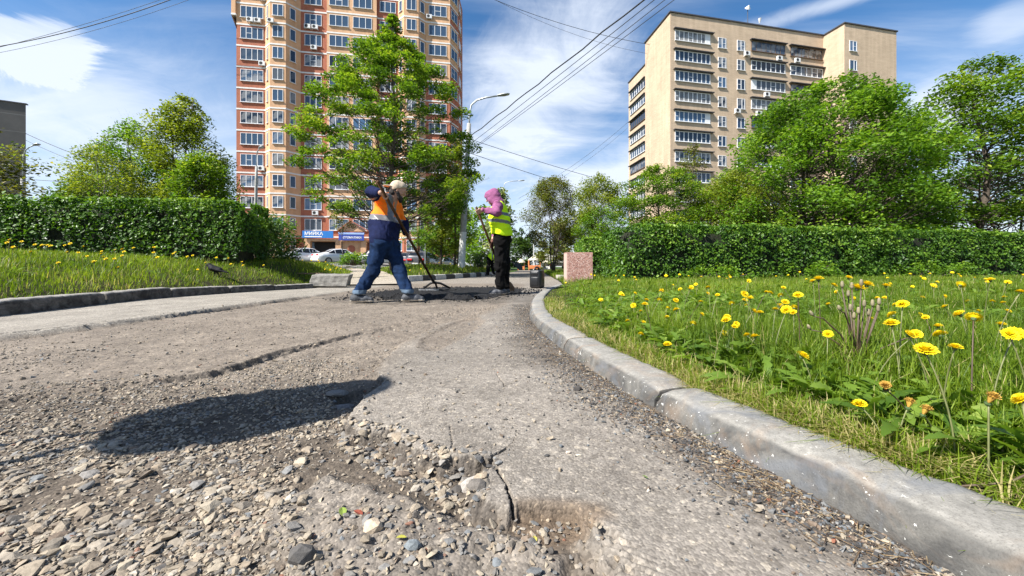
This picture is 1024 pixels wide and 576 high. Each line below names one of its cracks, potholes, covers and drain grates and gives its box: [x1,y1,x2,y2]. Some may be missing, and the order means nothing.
crack [189,315,381,376]
pothole [348,419,498,517]
crack [449,424,519,522]
pothole [513,496,616,550]
